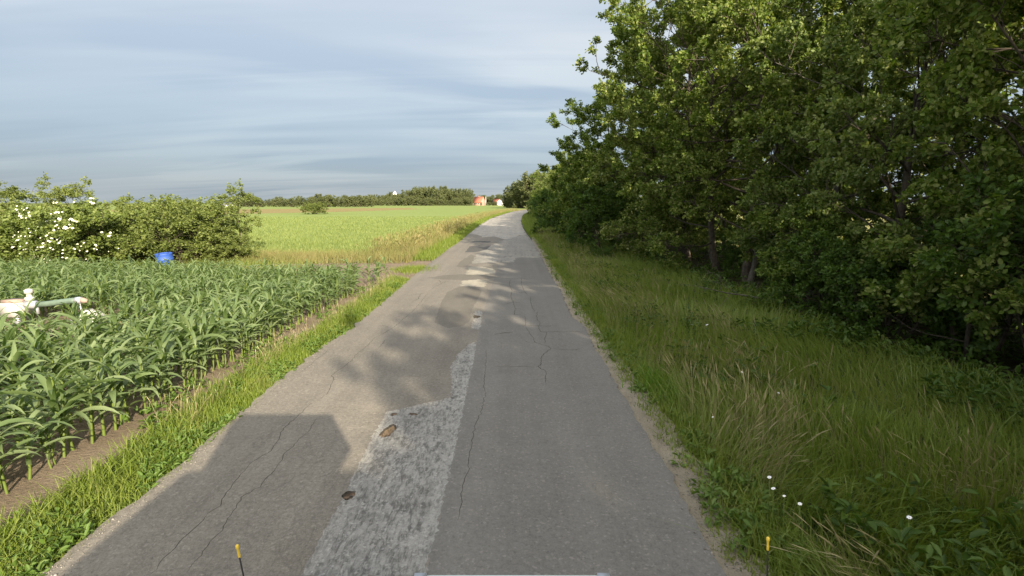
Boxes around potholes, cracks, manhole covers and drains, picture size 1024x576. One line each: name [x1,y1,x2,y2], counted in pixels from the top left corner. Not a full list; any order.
crack [499,278,583,383]
crack [155,280,440,572]
pothole [379,424,397,437]
